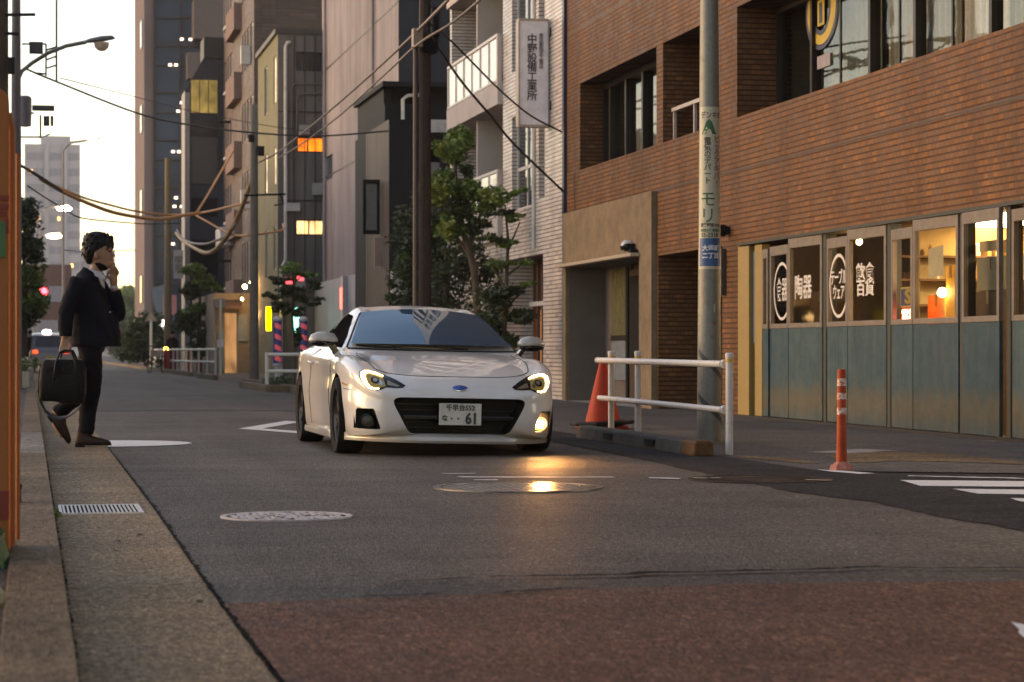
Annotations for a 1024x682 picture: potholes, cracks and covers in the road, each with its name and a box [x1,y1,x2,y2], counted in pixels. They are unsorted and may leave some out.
manhole cover [433,482,603,493]
manhole cover [687,475,834,484]
drain grate [58,504,144,515]
manhole cover [220,511,352,522]
